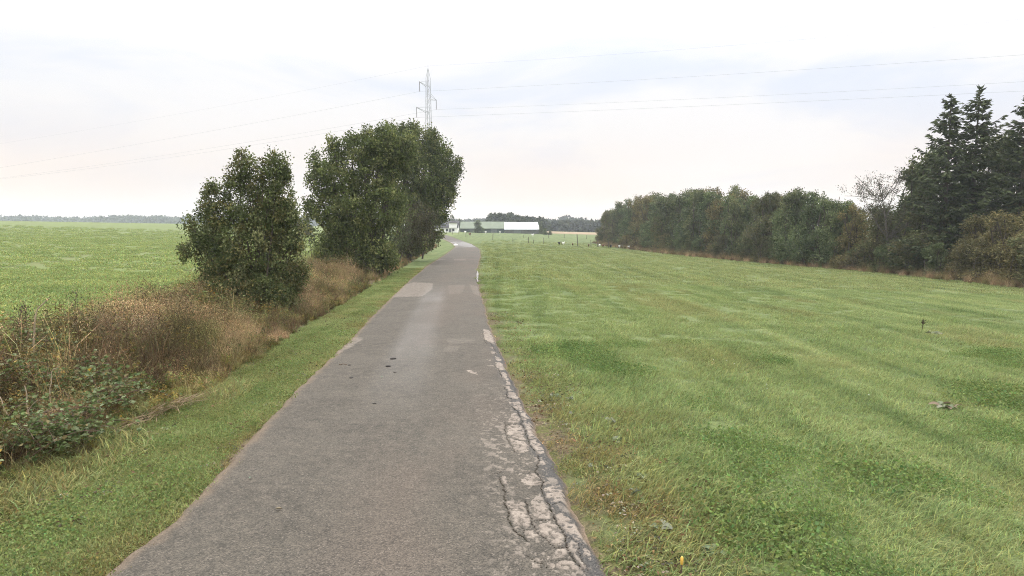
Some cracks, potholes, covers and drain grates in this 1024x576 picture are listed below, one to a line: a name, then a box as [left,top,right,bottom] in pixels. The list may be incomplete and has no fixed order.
crack [483,336,580,568]
